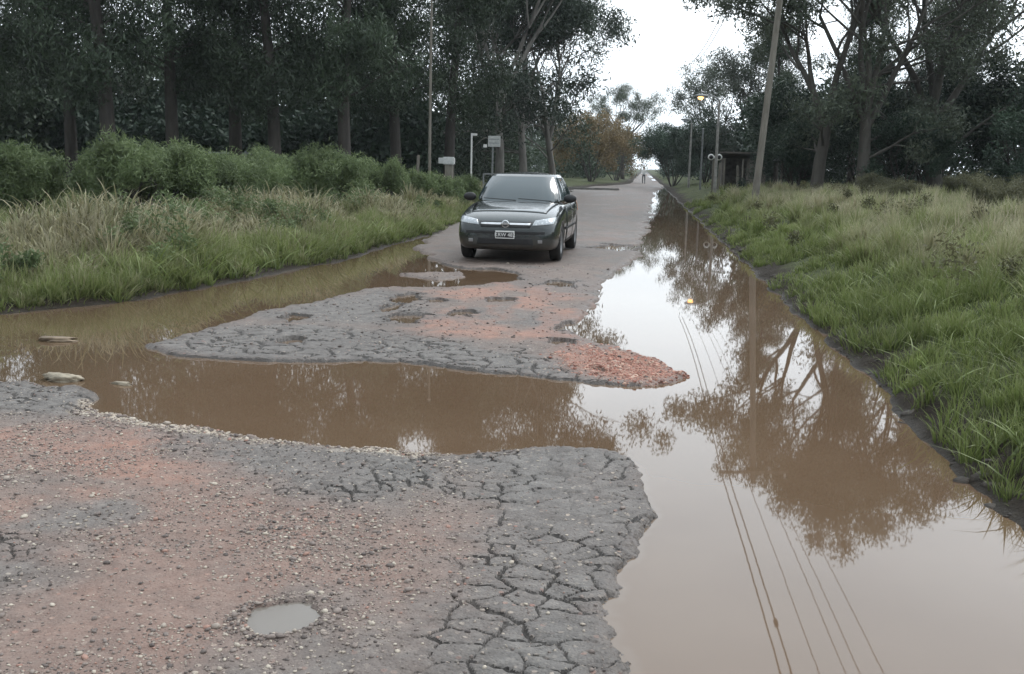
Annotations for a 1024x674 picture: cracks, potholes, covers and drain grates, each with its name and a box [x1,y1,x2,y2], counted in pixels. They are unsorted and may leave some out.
crack [150,297,612,384]
pothole [274,335,308,344]
pothole [447,309,484,317]
crack [370,449,656,674]
pothole [241,596,324,635]
pothole [378,308,438,326]
pothole [377,302,408,312]
pothole [94,350,654,467]
pothole [387,292,427,303]
pothole [375,262,524,288]
pothole [540,337,579,345]
pothole [580,242,650,251]
